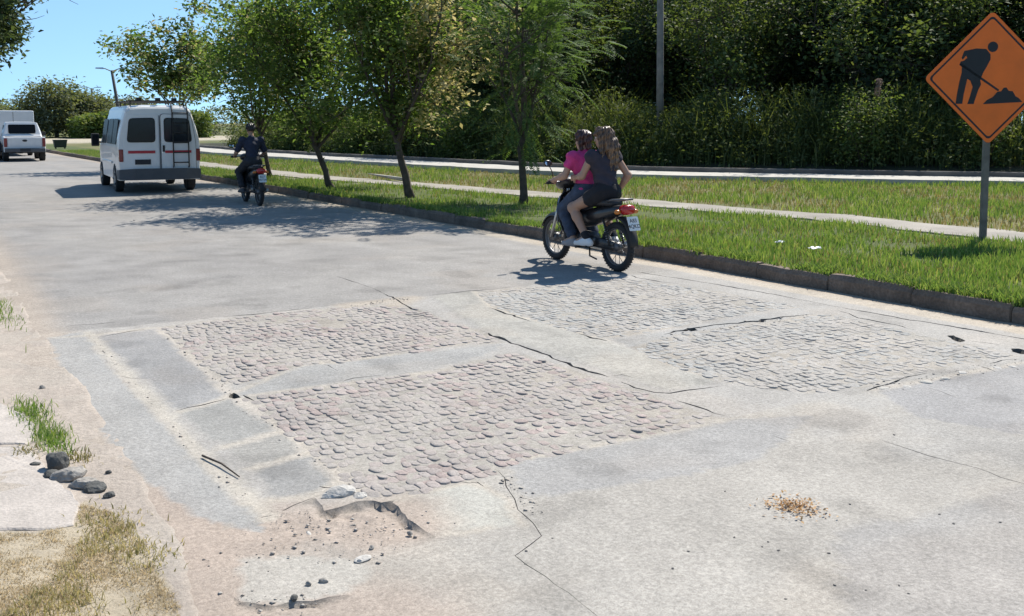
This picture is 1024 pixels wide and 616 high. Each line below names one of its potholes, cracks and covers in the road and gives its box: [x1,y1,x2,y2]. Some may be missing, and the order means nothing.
pothole [241,498,436,560]
crack [663,314,812,335]
crack [885,441,1024,484]
crack [464,471,597,616]
crack [615,374,728,417]
crack [867,373,949,395]
pothole [225,595,358,616]
